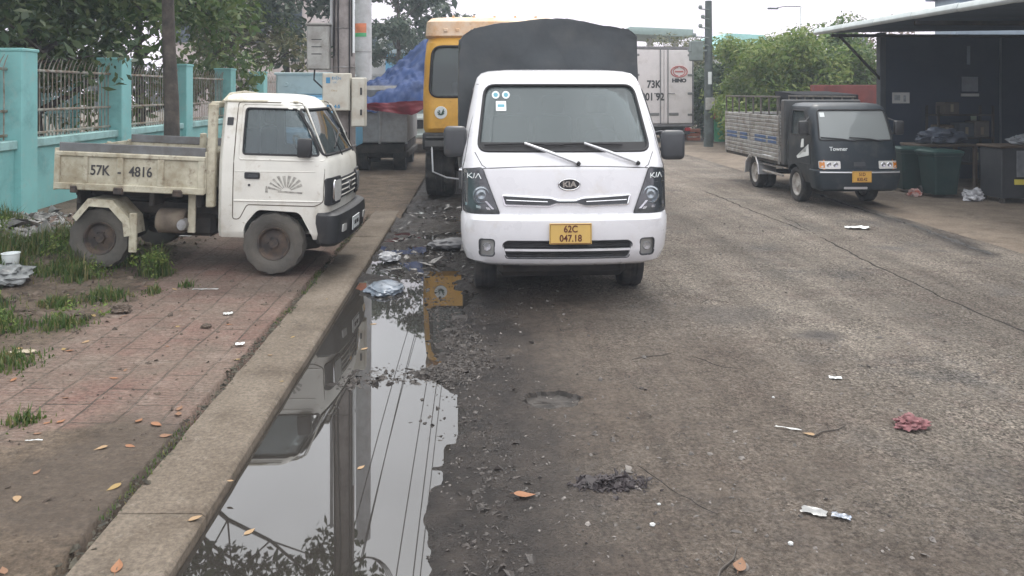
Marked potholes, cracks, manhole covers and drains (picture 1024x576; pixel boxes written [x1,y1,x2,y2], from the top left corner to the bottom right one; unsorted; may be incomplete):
crack [694,190,1024,334]
pothole [508,387,593,411]
crack [631,462,725,520]
